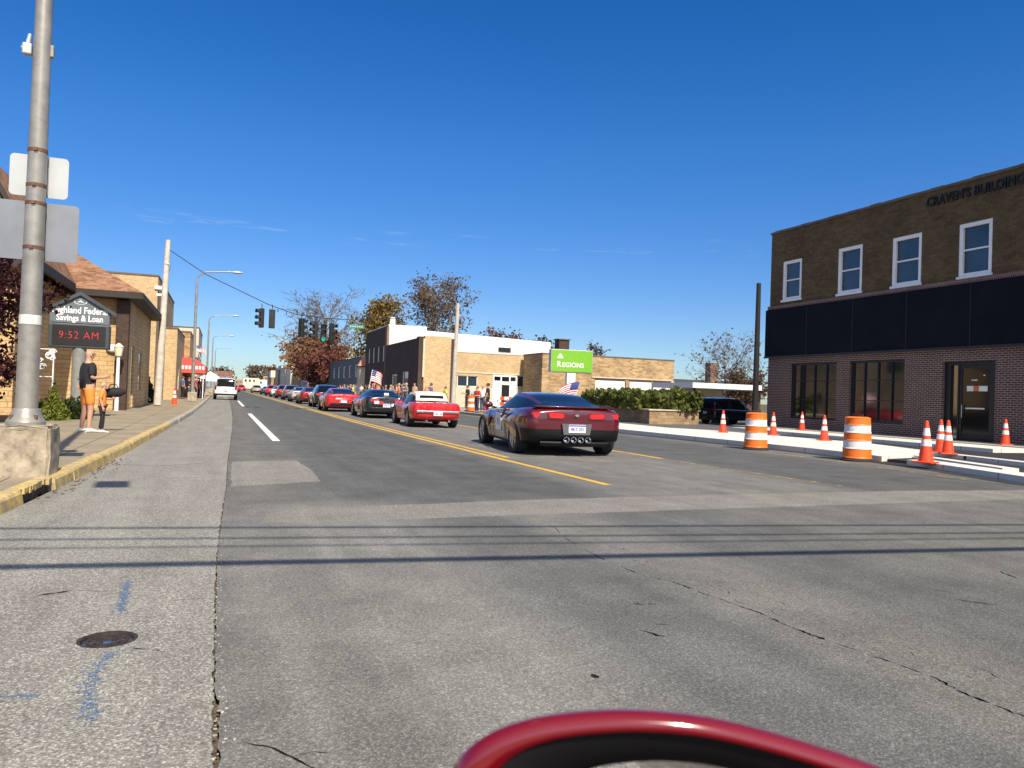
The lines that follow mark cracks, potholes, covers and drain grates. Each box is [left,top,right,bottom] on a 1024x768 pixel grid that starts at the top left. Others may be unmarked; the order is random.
manhole cover [76,631,138,648]
crack [550,525,1024,717]
crack [234,743,325,768]
